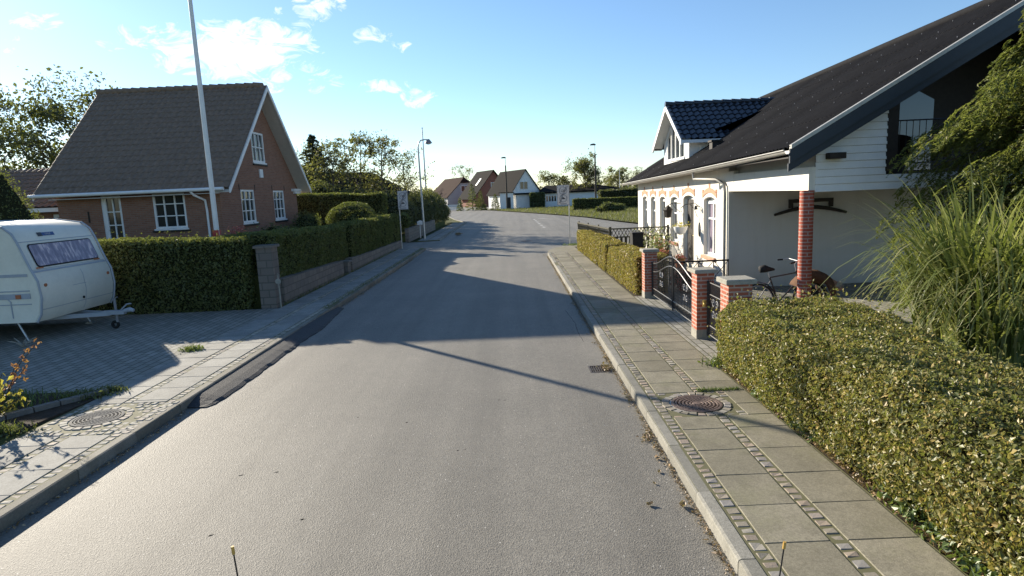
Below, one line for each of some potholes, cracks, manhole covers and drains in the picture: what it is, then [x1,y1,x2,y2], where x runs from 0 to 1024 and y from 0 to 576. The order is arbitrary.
drain grate [588,365,613,373]
manhole cover [671,395,723,413]
manhole cover [69,409,125,427]
